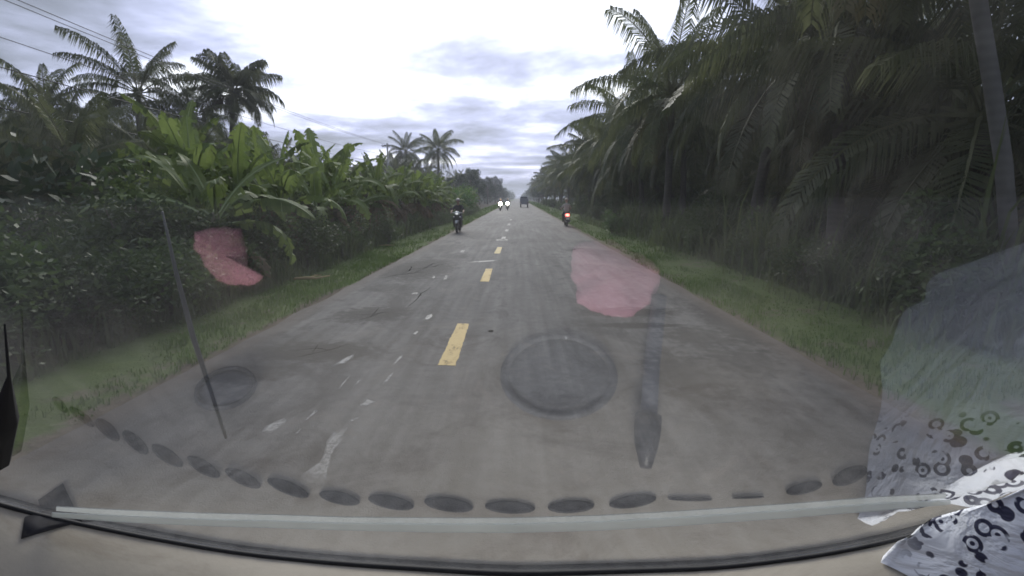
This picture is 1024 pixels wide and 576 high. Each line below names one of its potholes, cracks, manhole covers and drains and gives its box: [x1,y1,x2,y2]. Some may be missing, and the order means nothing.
crack [382,261,443,306]
